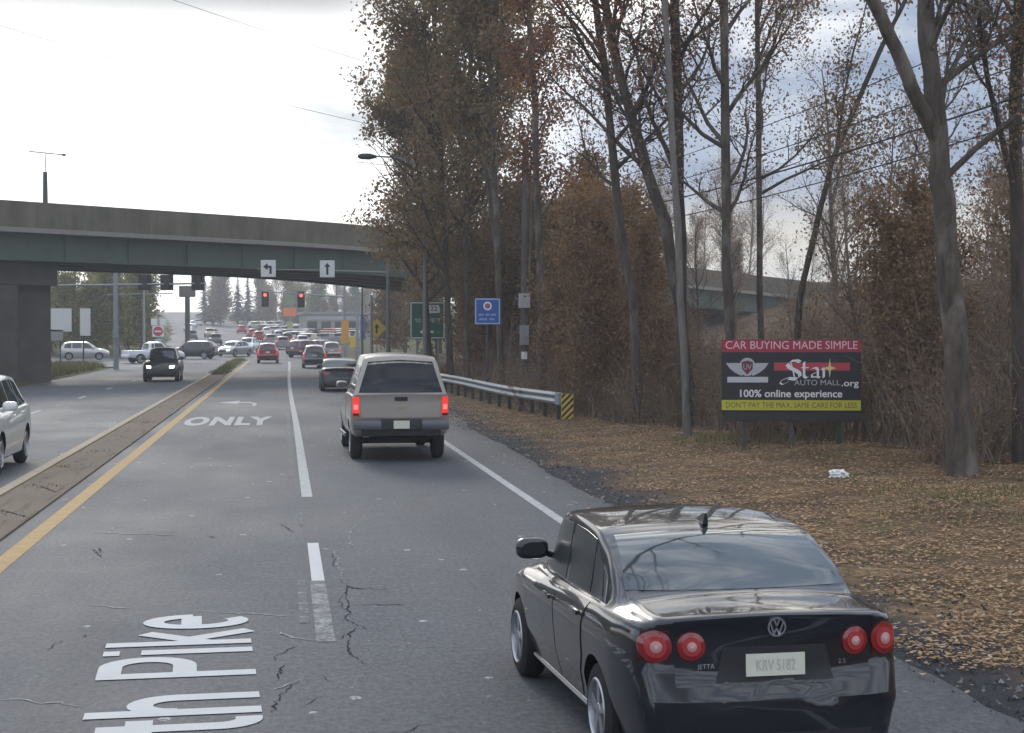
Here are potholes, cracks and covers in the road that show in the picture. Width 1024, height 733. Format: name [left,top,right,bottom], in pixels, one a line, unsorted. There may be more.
crack [332,524,403,665]
crack [205,611,334,712]
crack [91,525,160,557]
